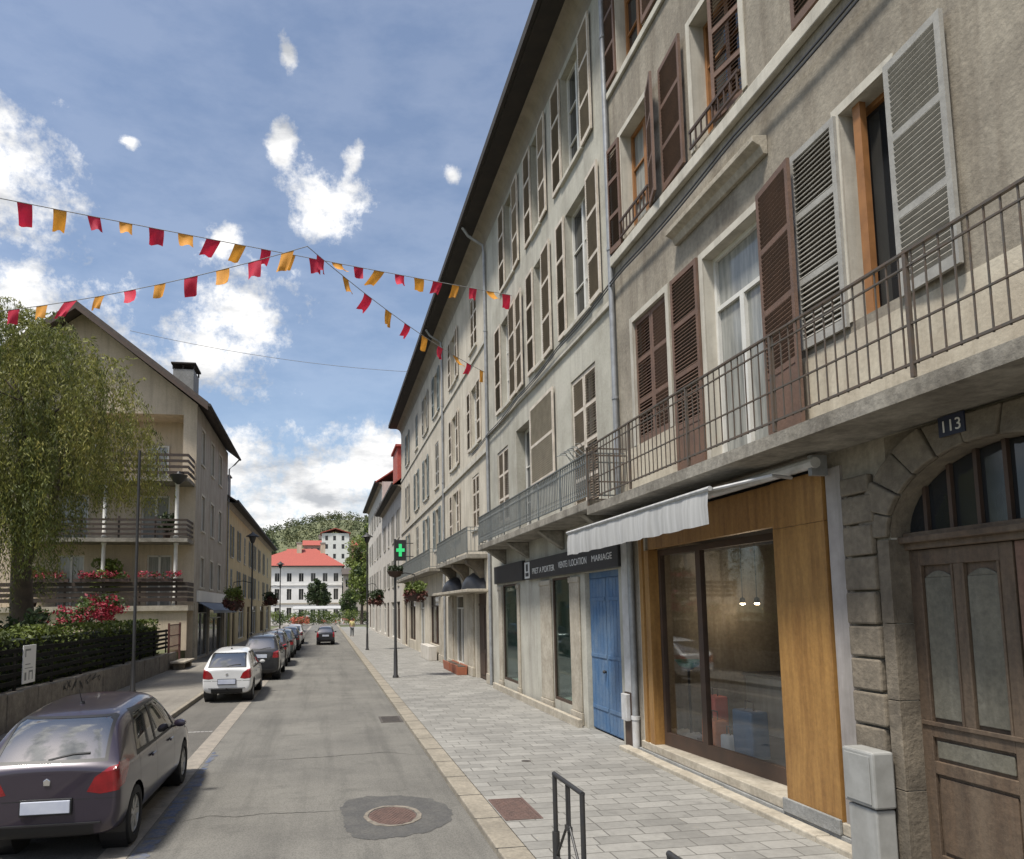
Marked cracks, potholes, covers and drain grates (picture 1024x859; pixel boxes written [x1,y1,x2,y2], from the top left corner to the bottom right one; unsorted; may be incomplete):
manhole cover [363,805,422,827]
utility cover [488,797,543,821]
